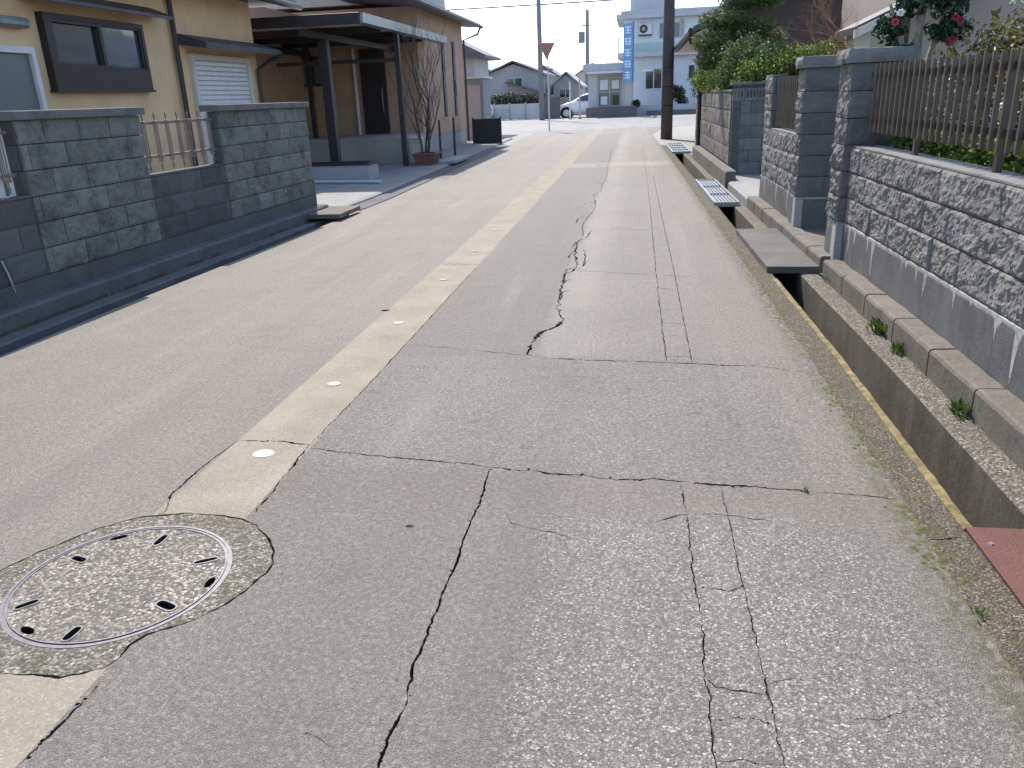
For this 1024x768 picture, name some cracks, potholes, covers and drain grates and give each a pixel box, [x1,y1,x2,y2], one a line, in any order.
crack [312,448,889,768]
drain grate [666,143,692,154]
manhole cover [0,513,273,677]
drain grate [695,179,740,207]
crack [416,147,806,373]
